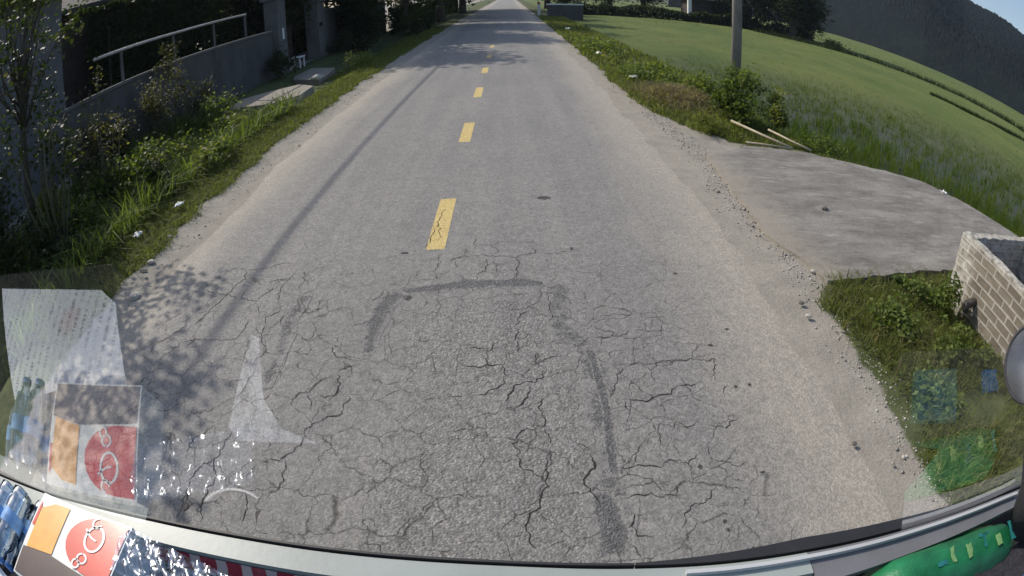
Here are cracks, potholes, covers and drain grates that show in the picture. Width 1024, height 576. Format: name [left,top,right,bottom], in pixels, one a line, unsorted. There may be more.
crack [450,307,564,552]
crack [419,213,578,279]
crack [584,289,726,411]
crack [241,348,357,525]
crack [182,427,233,522]
crack [151,257,326,396]
crack [619,420,745,536]
